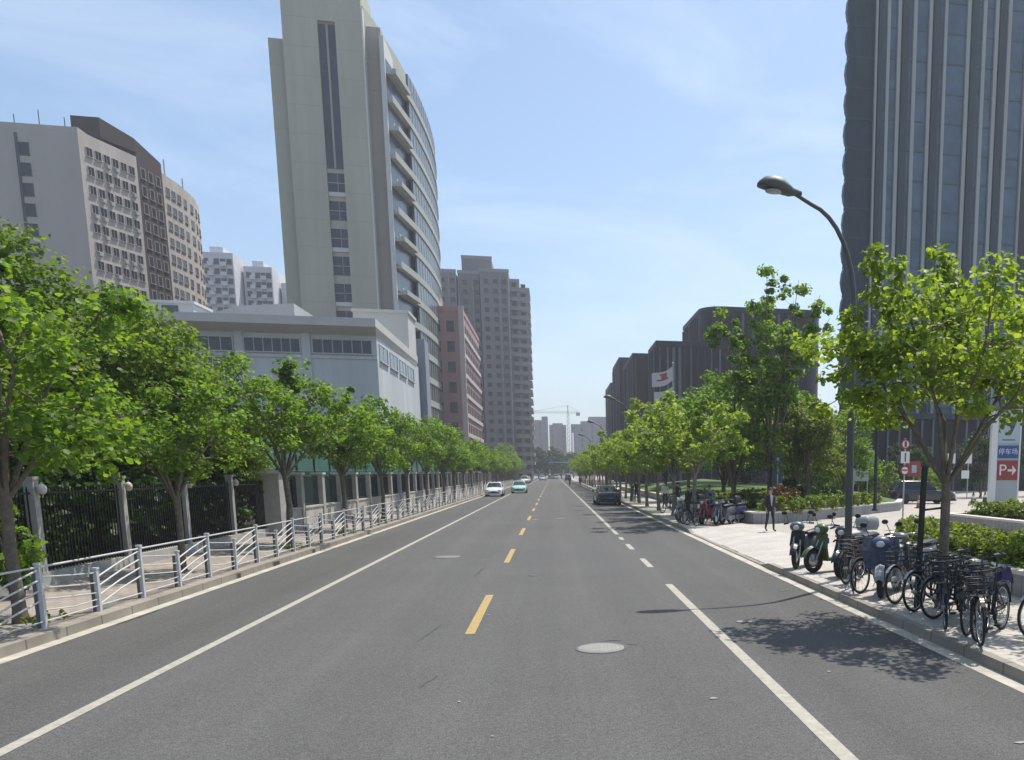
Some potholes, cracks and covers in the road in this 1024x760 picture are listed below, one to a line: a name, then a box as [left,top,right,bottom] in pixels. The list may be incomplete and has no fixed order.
manhole cover [575,642,627,654]
